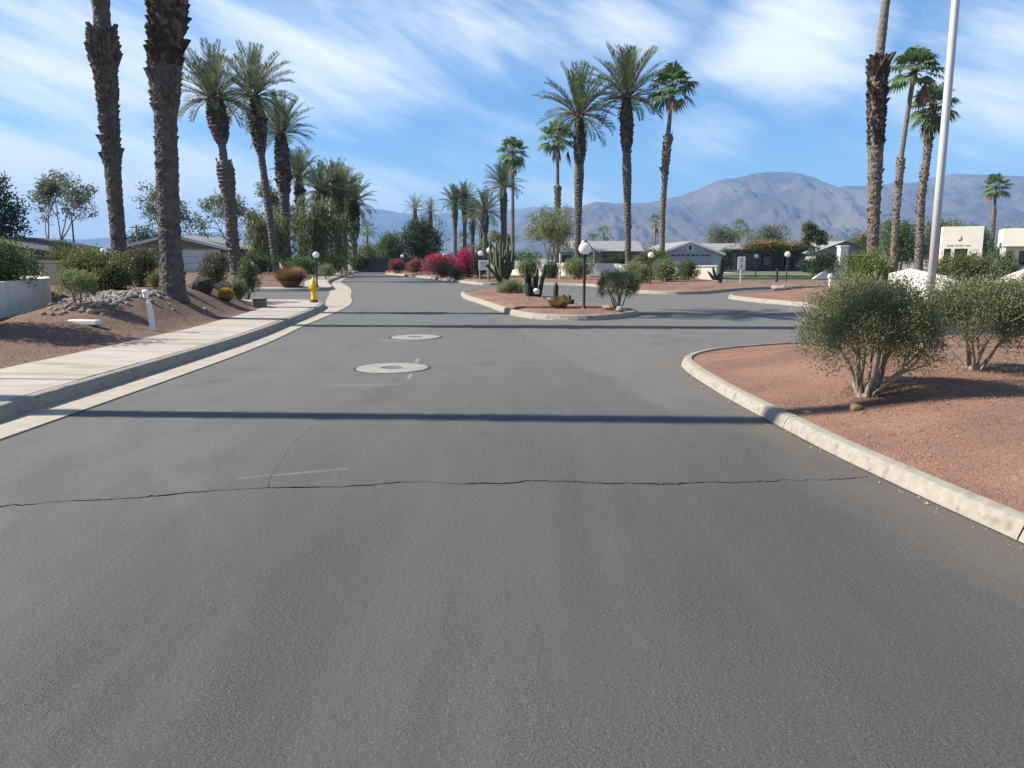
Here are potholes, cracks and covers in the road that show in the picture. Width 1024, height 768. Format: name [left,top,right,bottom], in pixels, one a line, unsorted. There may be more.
crack [0,424,867,507]
manhole cover [353,363,431,374]
